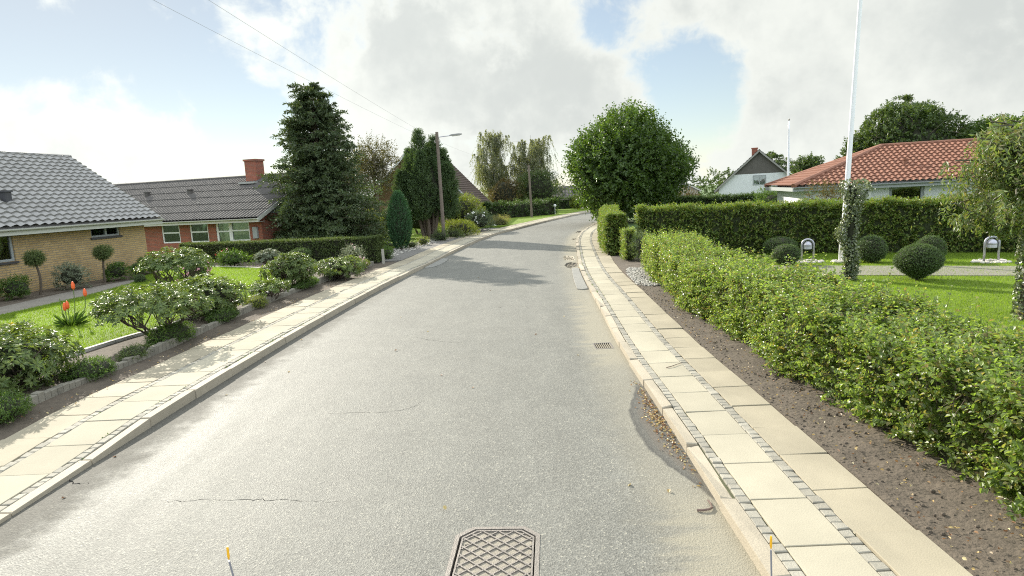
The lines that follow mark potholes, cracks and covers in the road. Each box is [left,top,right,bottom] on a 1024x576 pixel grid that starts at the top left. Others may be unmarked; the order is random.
manhole cover [445,526,540,576]
